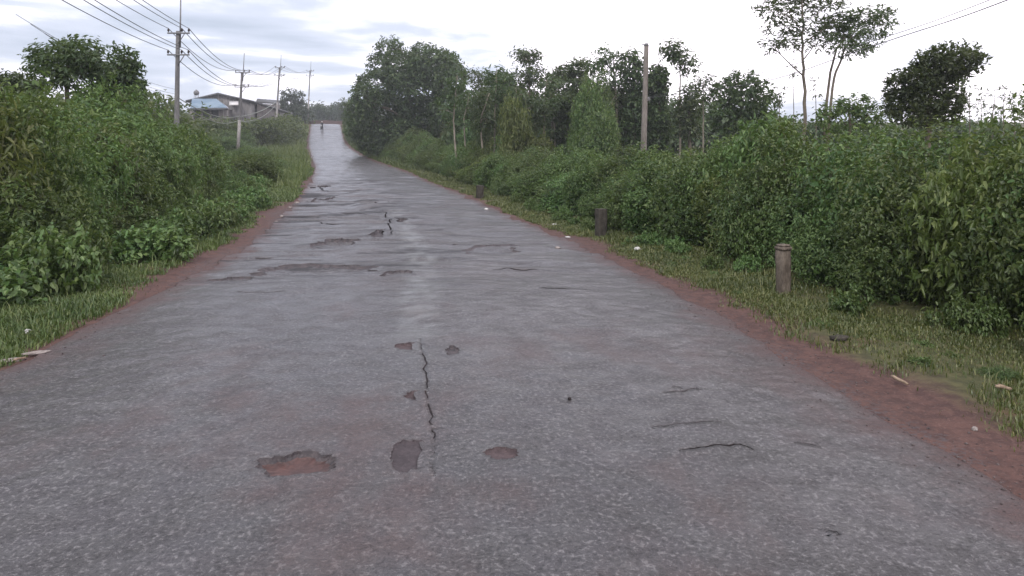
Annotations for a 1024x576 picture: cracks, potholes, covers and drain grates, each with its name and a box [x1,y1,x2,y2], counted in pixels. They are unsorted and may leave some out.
crack [661,384,706,396]
pothole [301,238,367,250]
crack [648,418,761,456]
pothole [379,435,441,479]
pothole [471,443,529,465]
pothole [438,344,467,358]
pothole [243,262,384,277]
pothole [243,447,348,483]
pothole [375,269,418,278]
